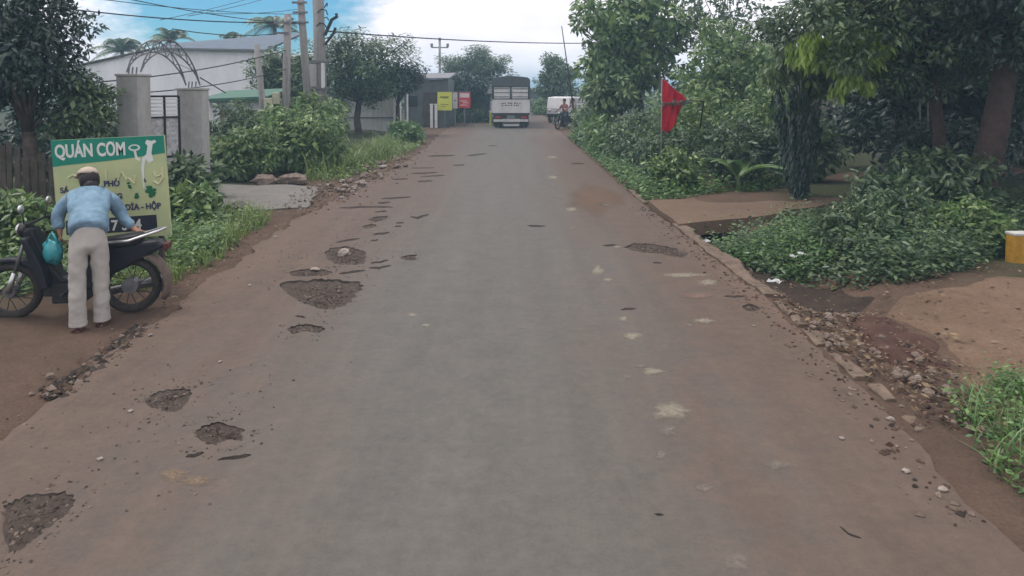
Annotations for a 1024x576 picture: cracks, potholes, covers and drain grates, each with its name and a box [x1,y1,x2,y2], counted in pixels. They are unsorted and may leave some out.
pothole [324,246,368,266]
pothole [193,422,245,446]
pothole [0,490,76,559]
pothole [141,388,192,414]
pothole [624,243,691,258]
pothole [286,324,325,334]
pothole [279,278,364,311]
